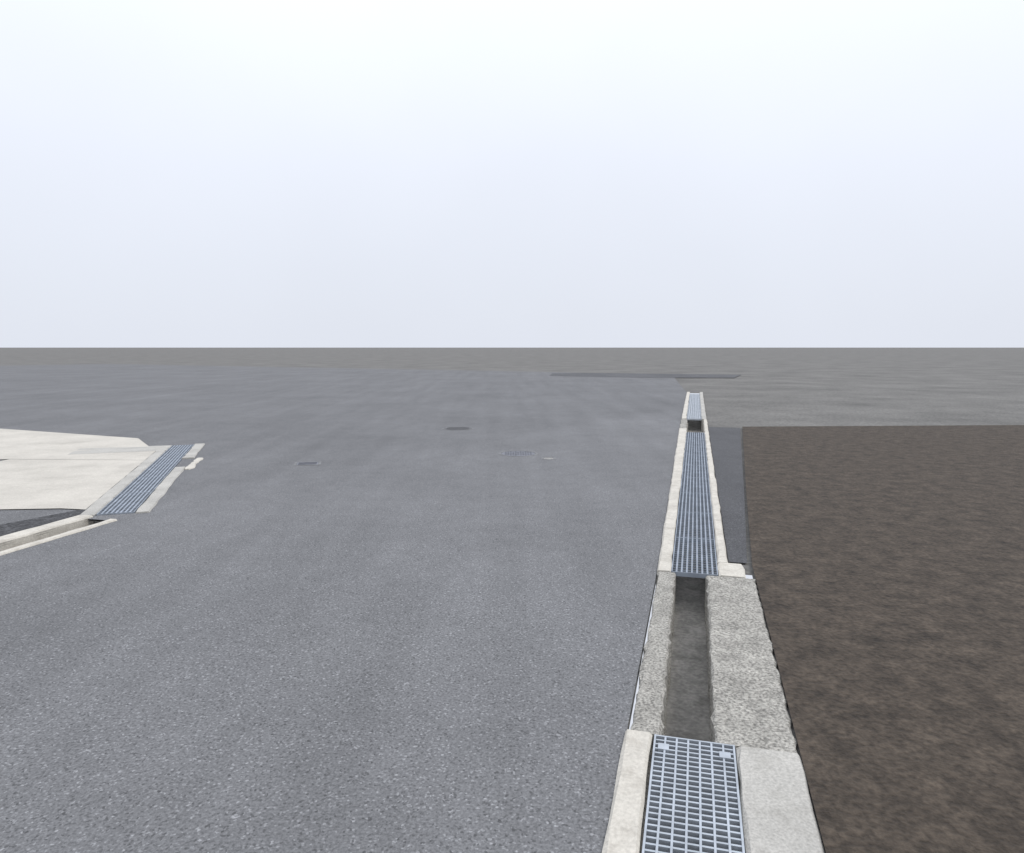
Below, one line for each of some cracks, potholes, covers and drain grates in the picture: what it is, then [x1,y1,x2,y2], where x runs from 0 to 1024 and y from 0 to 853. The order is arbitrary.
drain grate [680,477,710,494]
